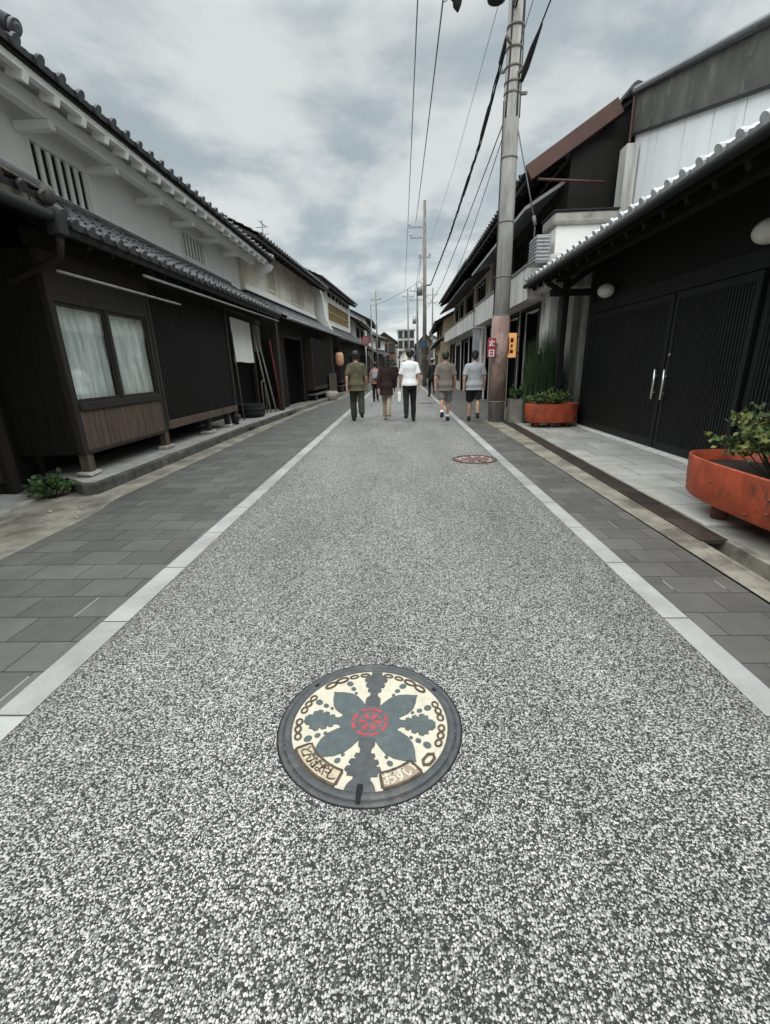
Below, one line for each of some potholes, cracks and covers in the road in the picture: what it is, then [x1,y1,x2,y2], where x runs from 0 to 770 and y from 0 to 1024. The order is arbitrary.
manhole cover [276,664,462,810]
manhole cover [452,455,498,464]
